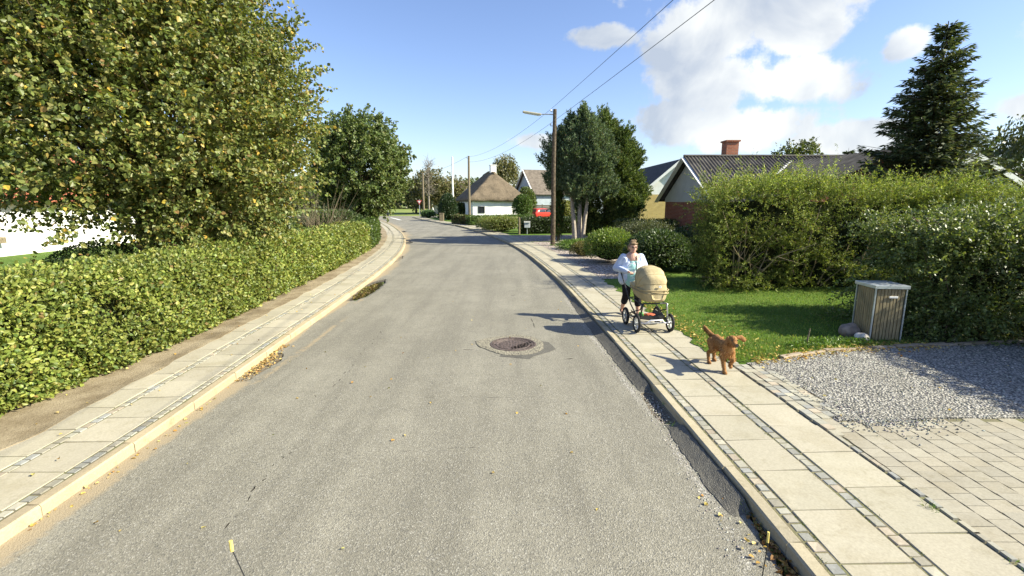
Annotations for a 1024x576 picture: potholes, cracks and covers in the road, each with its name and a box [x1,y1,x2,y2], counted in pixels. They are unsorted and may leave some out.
manhole cover [475,334,543,355]
